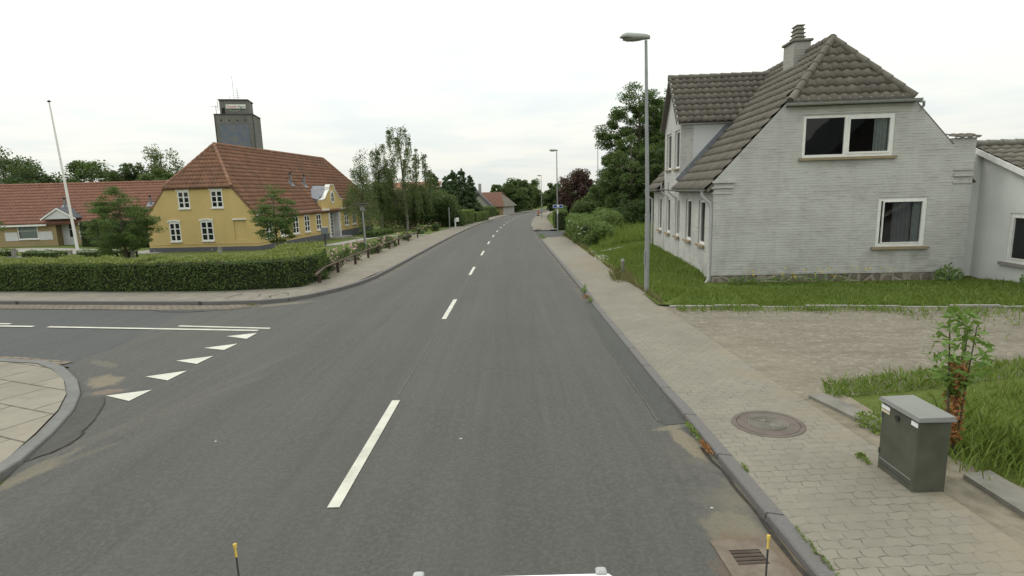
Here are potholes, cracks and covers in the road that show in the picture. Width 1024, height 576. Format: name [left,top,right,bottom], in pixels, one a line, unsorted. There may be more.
manhole cover [732,410,806,438]
